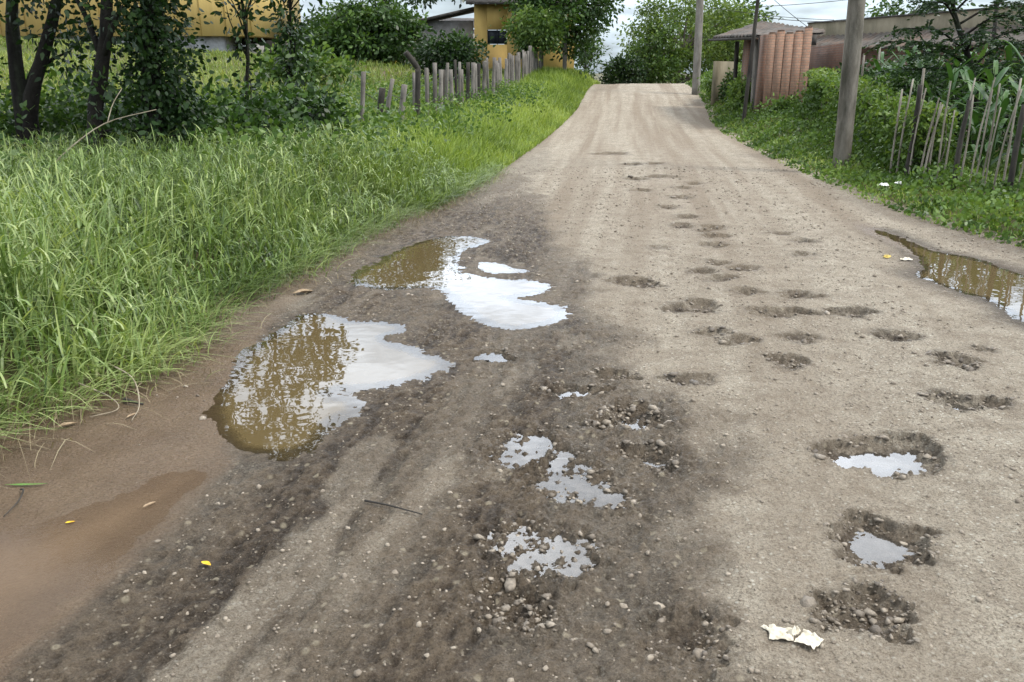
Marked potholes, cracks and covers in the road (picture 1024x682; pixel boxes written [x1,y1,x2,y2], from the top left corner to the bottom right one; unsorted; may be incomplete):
pothole [747,350,819,374]
pothole [862,327,933,345]
pothole [656,296,730,316]
pothole [865,228,1024,326]
pothole [909,386,1024,417]
pothole [679,324,742,339]
pothole [808,502,965,583]
pothole [452,510,632,603]
pothole [920,348,999,375]
pothole [341,233,582,333]
pothole [185,308,463,467]
pothole [506,450,659,520]
